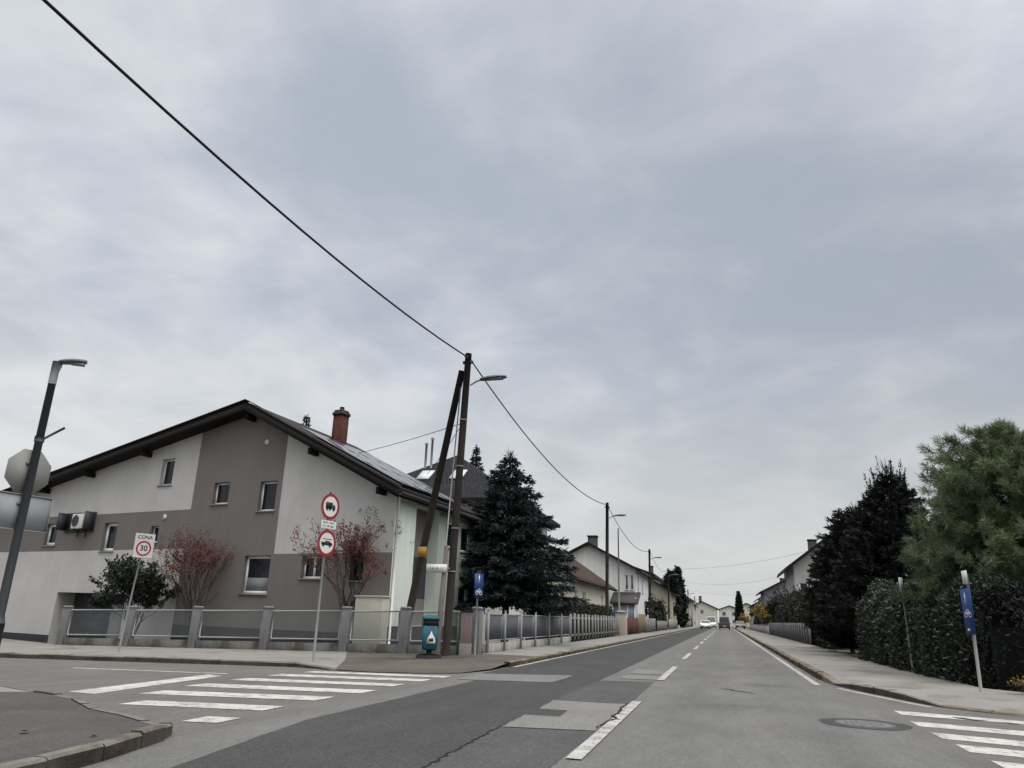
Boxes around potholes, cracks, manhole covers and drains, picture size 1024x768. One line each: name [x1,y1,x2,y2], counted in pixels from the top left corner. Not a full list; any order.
manhole cover [819,718,913,730]
